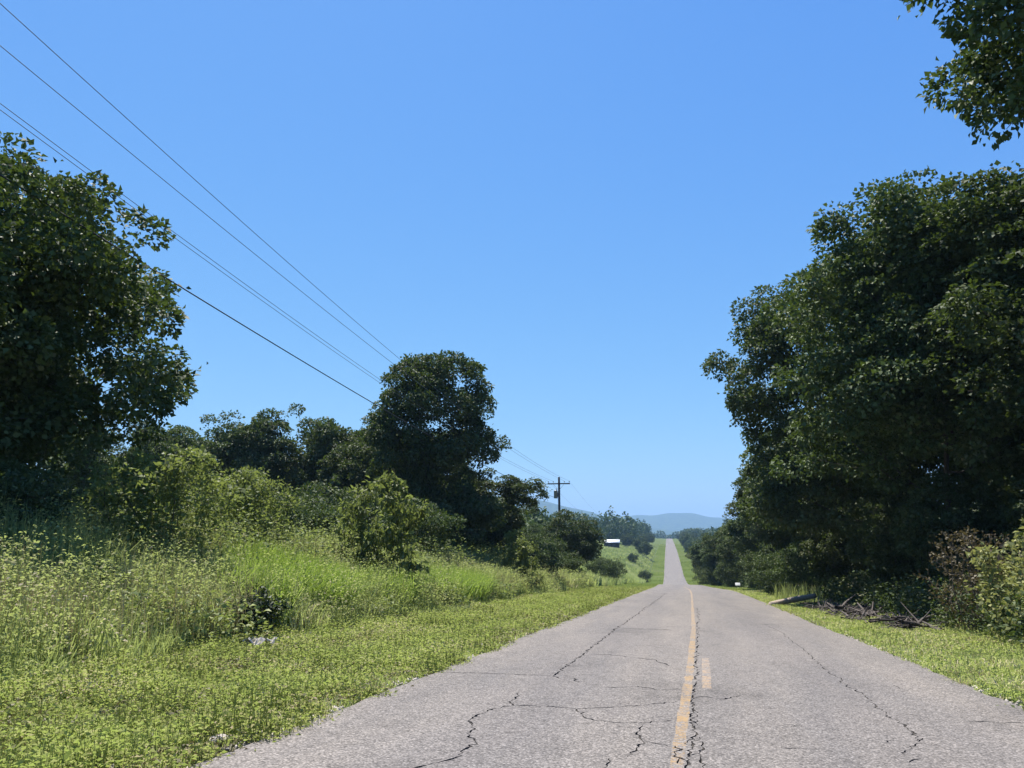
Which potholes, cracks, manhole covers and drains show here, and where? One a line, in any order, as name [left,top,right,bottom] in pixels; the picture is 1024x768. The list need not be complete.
crack [414,608,737,768]
crack [766,624,923,763]
